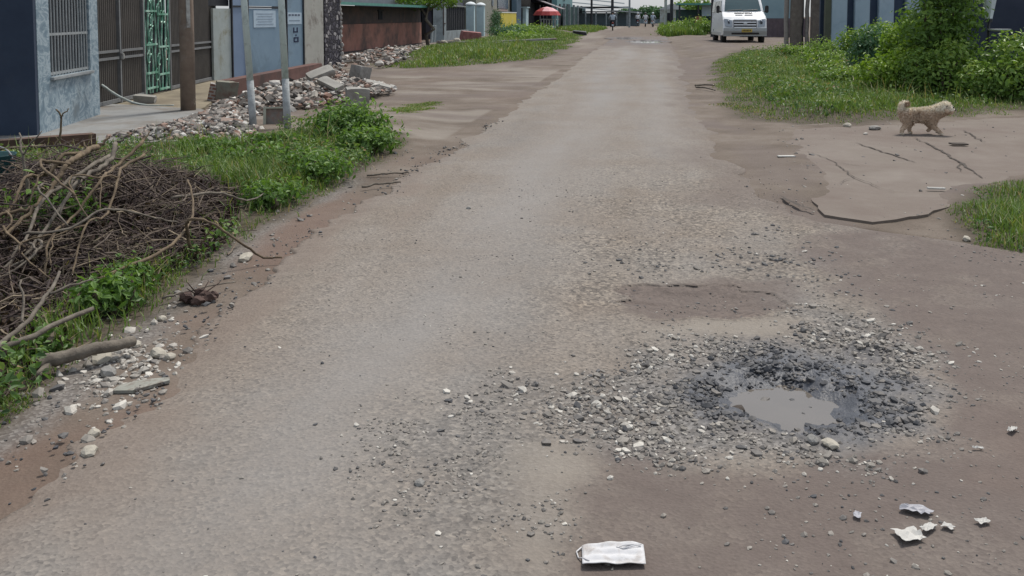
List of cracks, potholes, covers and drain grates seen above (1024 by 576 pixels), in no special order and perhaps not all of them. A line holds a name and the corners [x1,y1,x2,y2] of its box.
pothole [840,342,895,366]
crack [781,196,813,210]
pothole [685,364,876,440]
crack [811,130,983,189]
